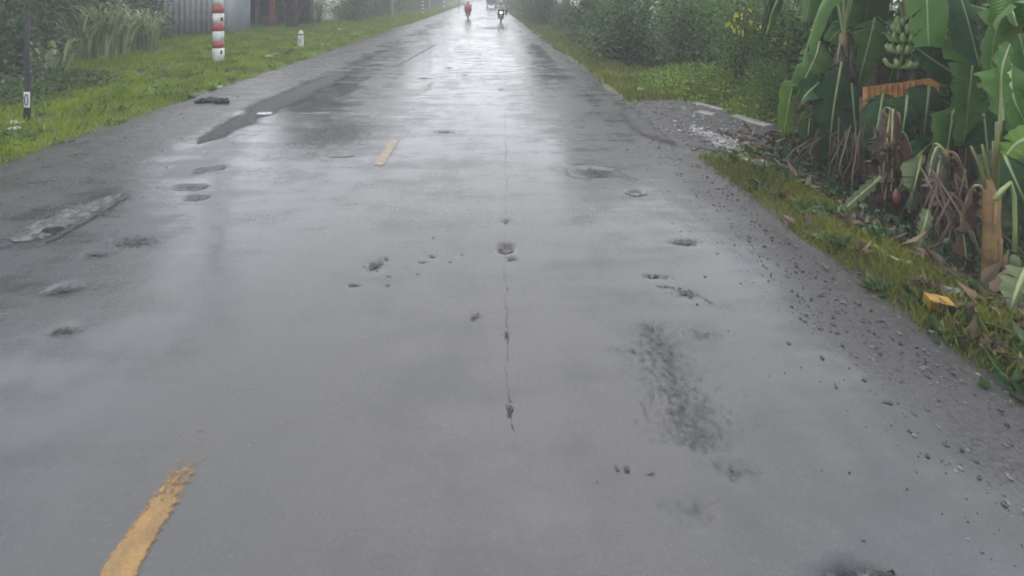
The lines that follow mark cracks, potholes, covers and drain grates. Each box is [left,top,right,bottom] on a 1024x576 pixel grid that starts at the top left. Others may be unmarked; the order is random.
pothole [8,194,121,242]
